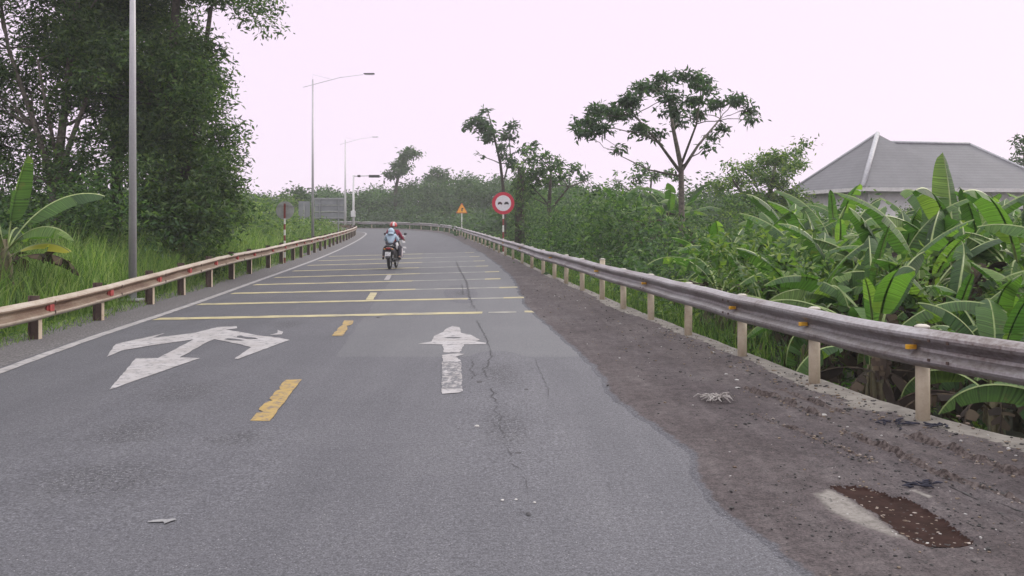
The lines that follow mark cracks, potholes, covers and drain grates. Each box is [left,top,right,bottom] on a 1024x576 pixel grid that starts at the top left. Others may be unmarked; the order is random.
crack [456,262,528,493]
pothole [830,485,973,548]
